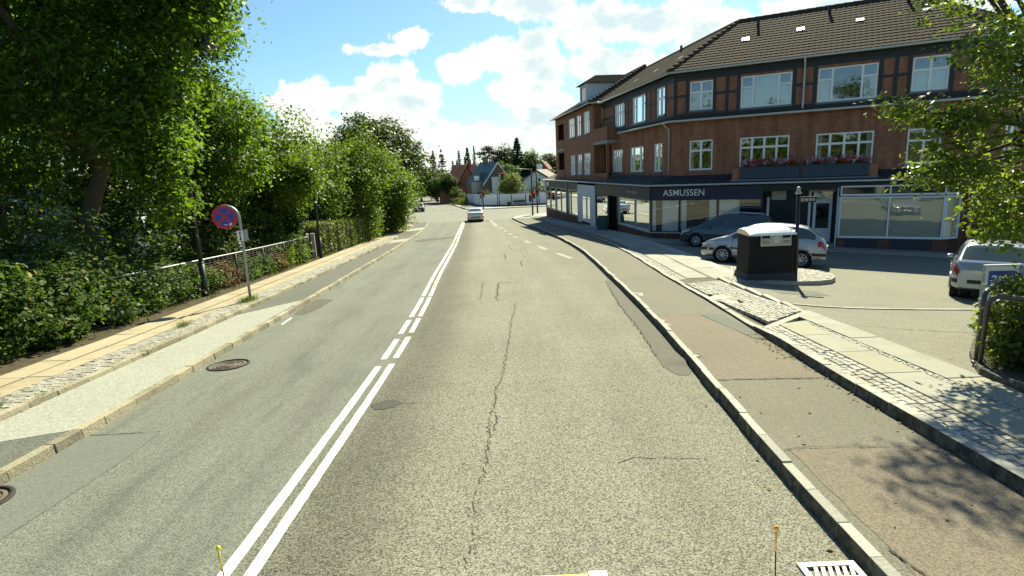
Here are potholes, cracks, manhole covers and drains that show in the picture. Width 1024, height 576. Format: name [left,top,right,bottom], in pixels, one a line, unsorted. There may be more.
manhole cover [0,485,16,505]
manhole cover [206,359,250,371]
drain grate [797,560,867,576]
crack [463,239,526,576]
